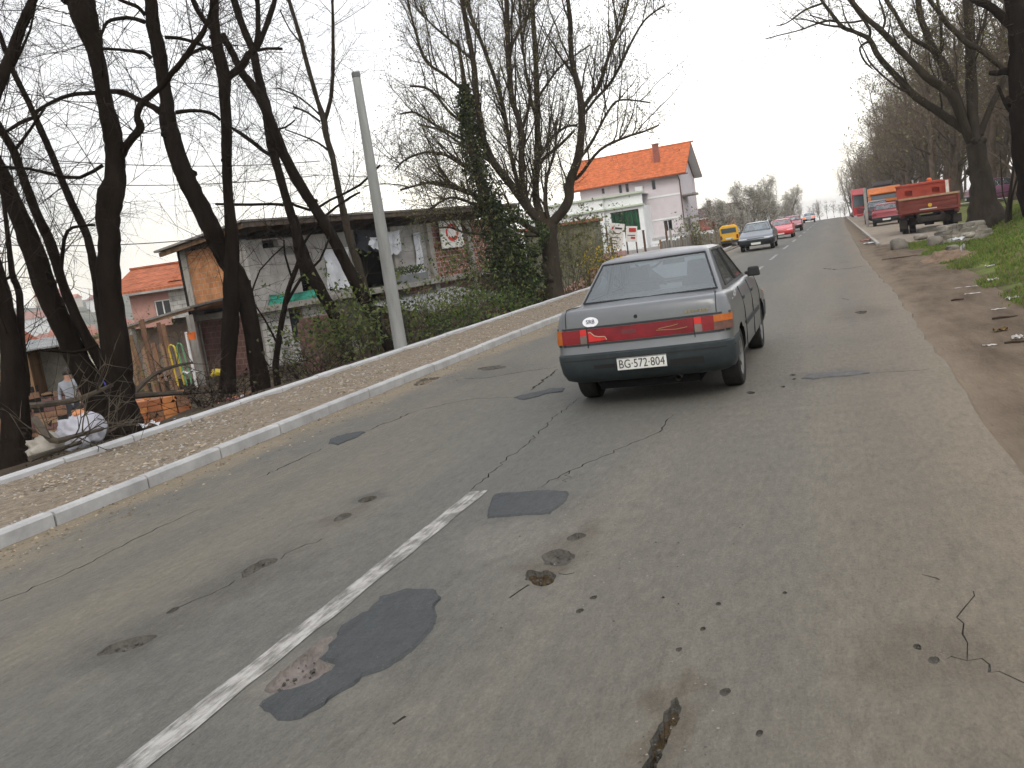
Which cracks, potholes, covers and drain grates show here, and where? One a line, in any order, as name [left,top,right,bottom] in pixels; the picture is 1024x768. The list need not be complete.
pothole [567,533,586,541]
crack [922,574,1024,683]
pothole [525,570,556,586]
crack [470,398,579,491]
pothole [541,549,575,566]
crack [537,415,673,489]
pothole [97,635,157,656]
crack [1,508,202,601]
pothole [241,558,278,578]
pothole [642,697,682,768]
crack [471,367,556,390]
